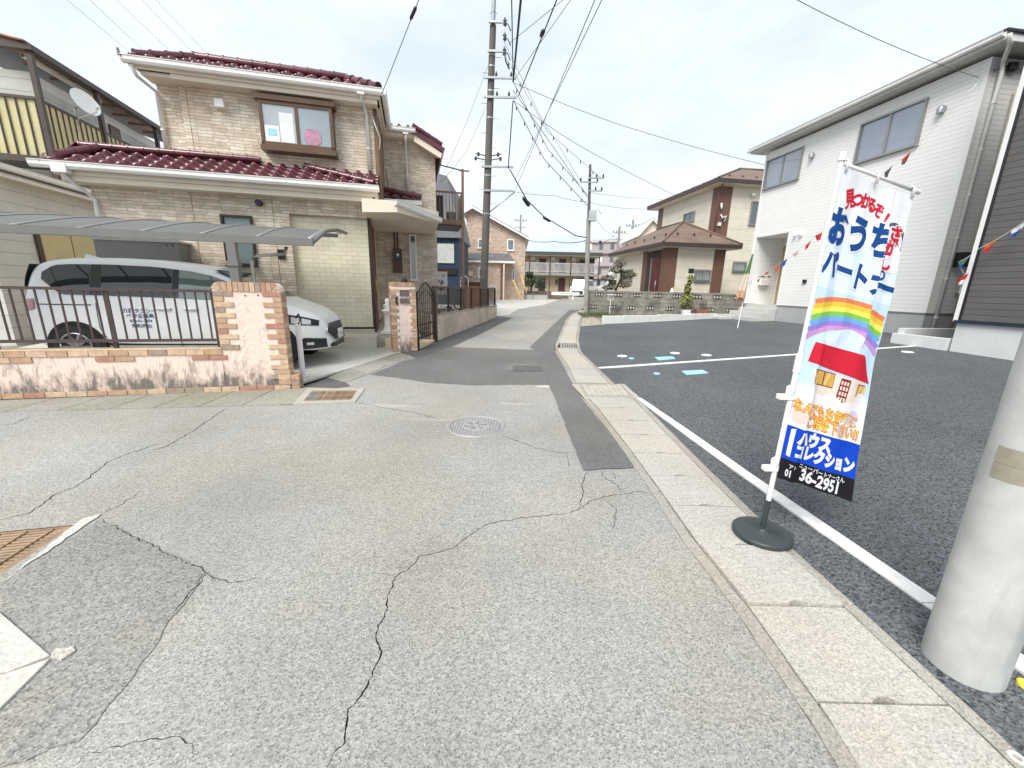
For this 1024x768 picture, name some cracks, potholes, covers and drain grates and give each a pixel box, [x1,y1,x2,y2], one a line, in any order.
crack [1,409,225,520]
drain grate [0,526,72,574]
drain grate [293,388,365,405]
crack [327,472,652,767]
manhole cover [447,415,504,437]
drain grate [580,384,633,397]
crack [92,736,197,755]
